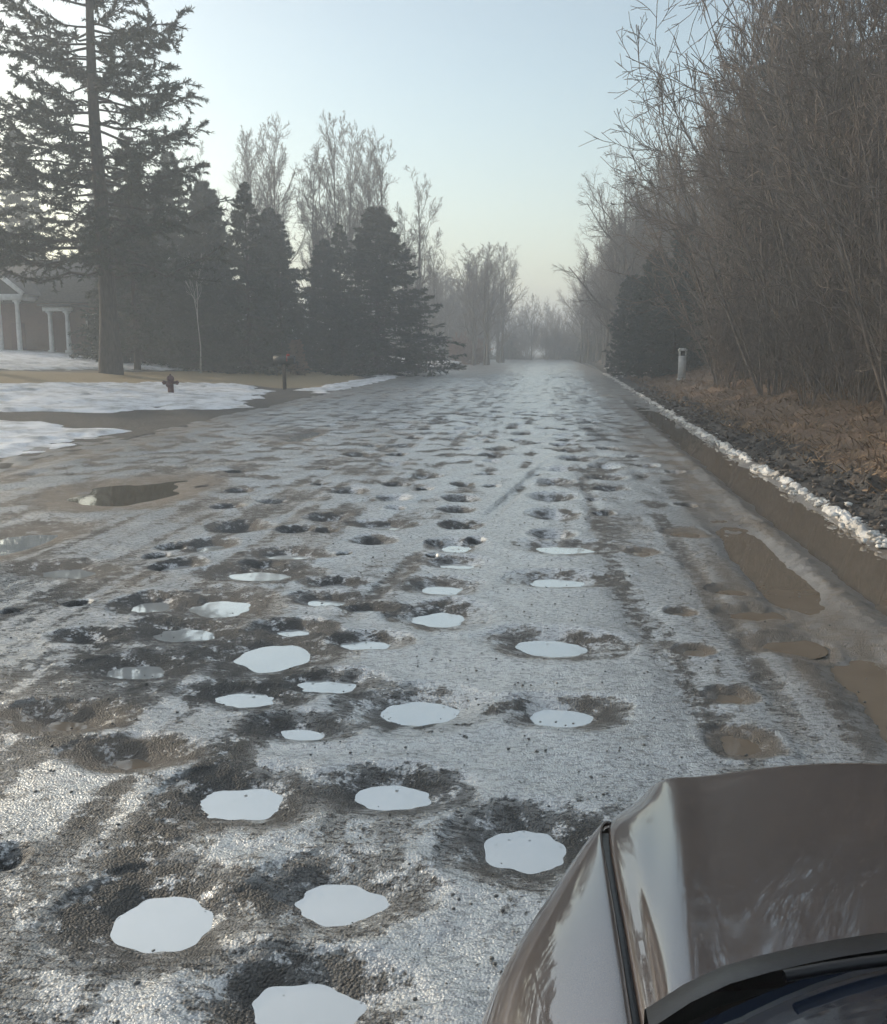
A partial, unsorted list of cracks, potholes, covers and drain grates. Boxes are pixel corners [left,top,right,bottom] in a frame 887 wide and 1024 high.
pothole [24,855,268,987]
pothole [279,666,396,696]
pothole [172,678,323,711]
pothole [432,794,612,897]
pothole [150,759,325,834]
pothole [494,690,639,732]
pothole [703,722,791,760]
pothole [472,624,642,662]
pothole [254,846,454,944]
pothole [188,627,365,683]
pothole [703,581,762,597]
pothole [318,757,487,820]
